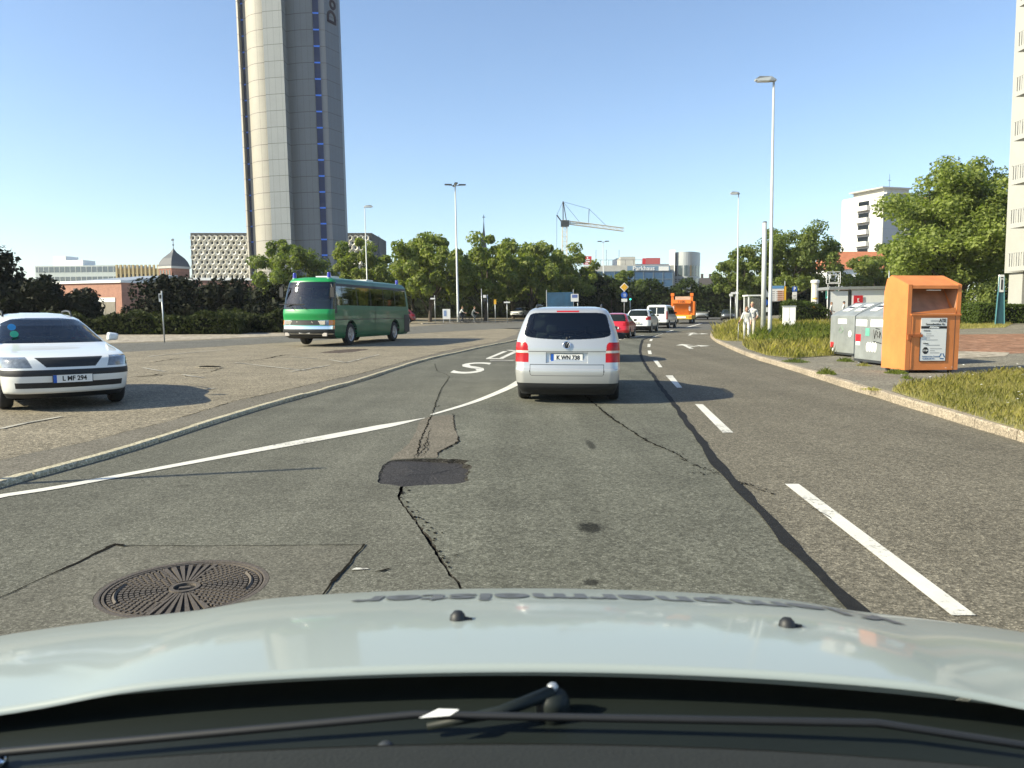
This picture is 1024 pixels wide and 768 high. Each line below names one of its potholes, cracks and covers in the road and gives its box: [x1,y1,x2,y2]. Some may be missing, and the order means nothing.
manhole cover [93,560,269,618]
crack [585,396,776,494]
crack [375,488,468,589]
crack [414,366,460,457]
